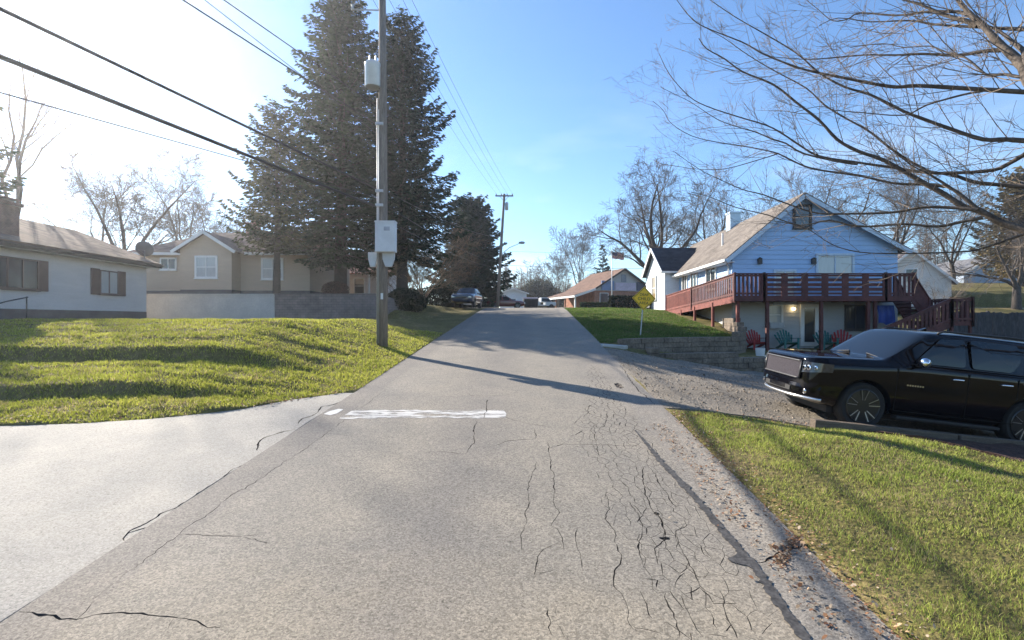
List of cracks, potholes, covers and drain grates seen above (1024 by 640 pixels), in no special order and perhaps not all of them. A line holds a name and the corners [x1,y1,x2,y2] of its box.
crack [548,366,778,640]
crack [27,603,220,628]
crack [427,393,583,582]
